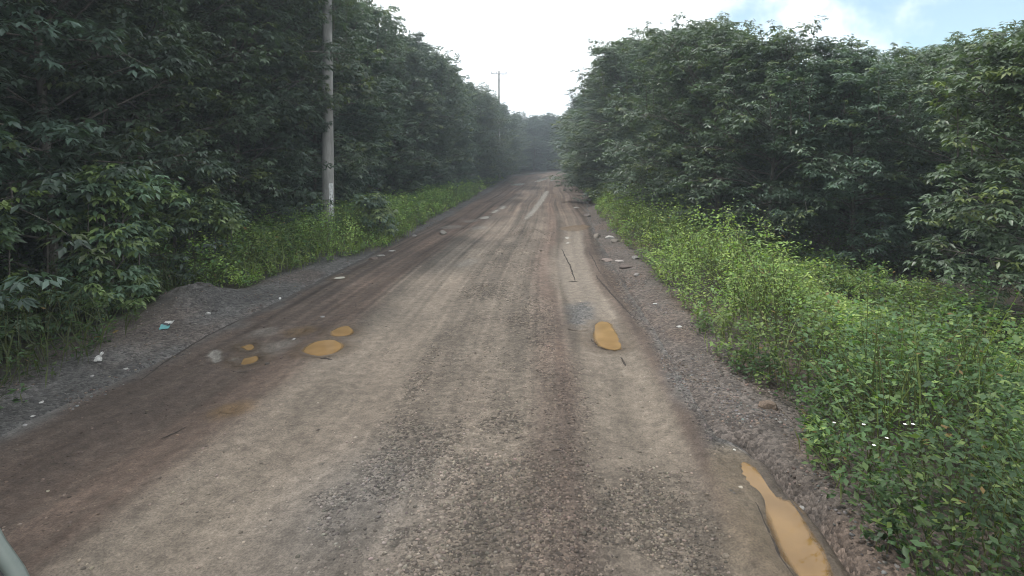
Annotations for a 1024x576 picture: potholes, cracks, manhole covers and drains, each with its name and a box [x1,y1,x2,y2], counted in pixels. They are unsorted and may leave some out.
pothole [730,457,844,576]
pothole [297,336,348,357]
pothole [325,324,359,337]
pothole [232,353,265,367]
crack [562,250,637,321]
pothole [589,320,627,351]
